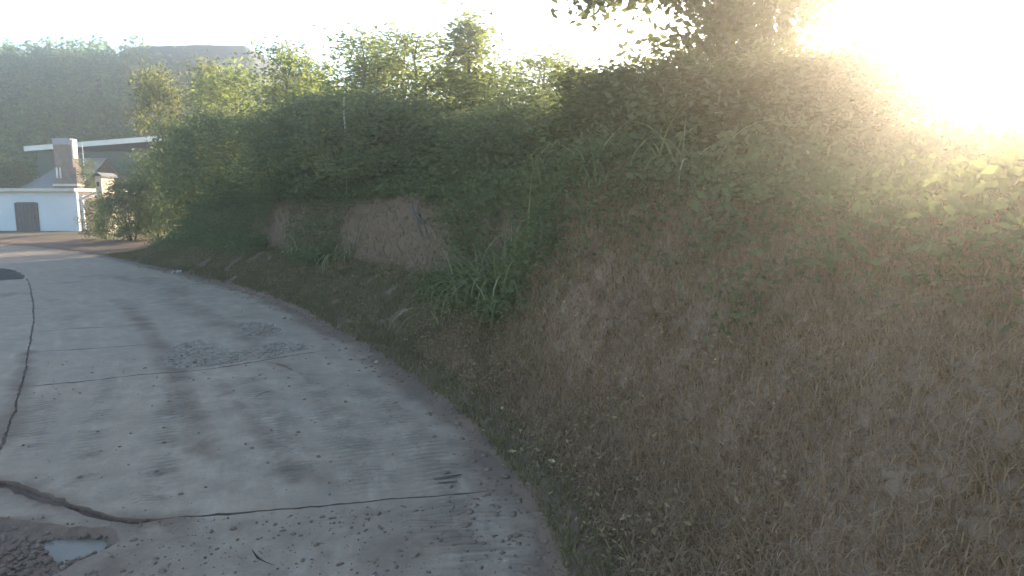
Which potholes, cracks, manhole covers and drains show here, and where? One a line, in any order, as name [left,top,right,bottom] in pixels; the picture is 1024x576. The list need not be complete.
crack [0,480,497,524]
crack [0,278,319,450]
pothole [0,517,121,576]
